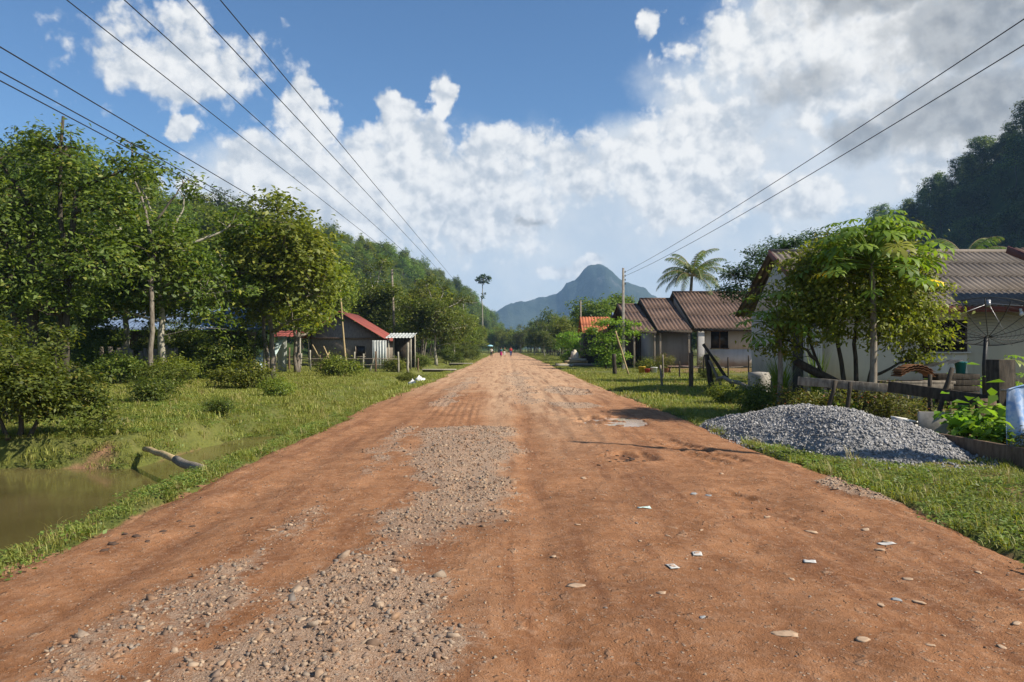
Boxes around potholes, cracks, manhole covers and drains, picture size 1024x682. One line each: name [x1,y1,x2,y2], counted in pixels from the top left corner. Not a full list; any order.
pothole [572,415,654,428]
pothole [597,450,664,462]
